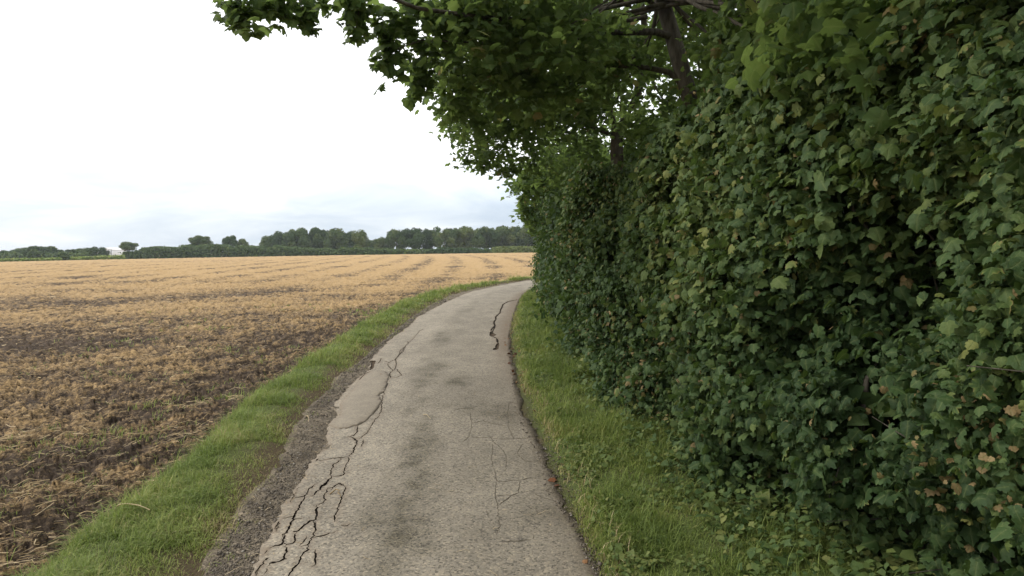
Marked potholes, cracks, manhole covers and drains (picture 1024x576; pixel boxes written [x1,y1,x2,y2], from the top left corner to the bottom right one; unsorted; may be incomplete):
crack [256,396,383,576]
crack [457,402,559,543]
crack [490,300,516,343]
crack [360,314,423,396]
